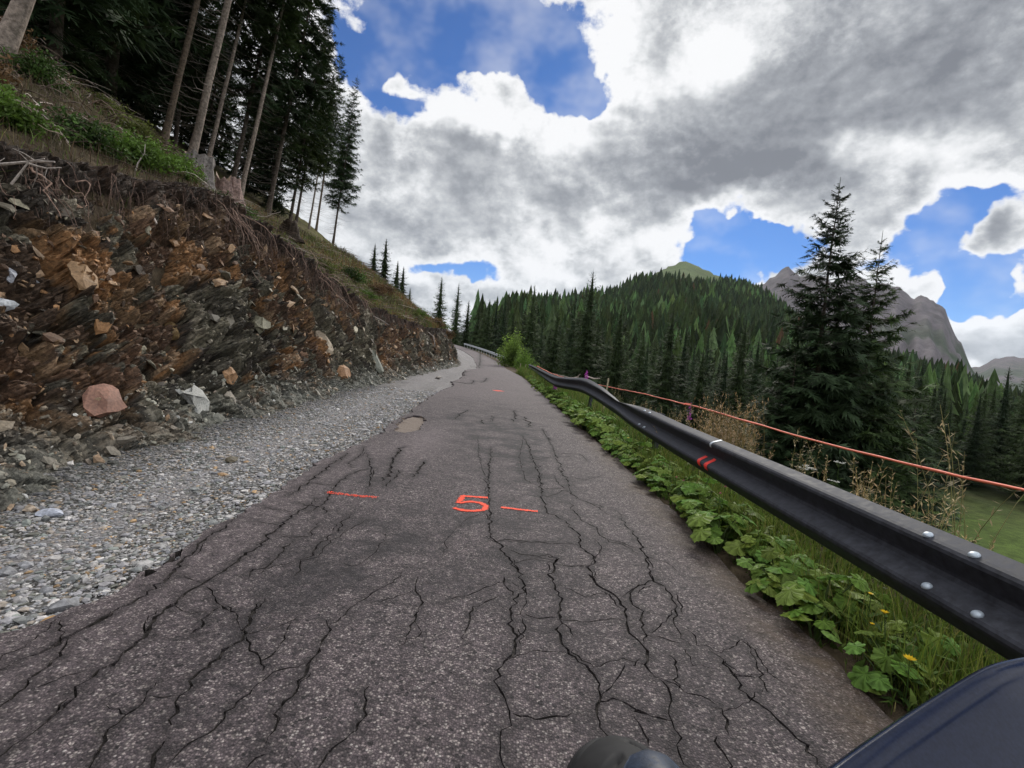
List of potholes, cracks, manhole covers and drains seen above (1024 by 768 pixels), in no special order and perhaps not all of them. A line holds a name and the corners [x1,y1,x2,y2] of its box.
pothole [395,416,425,433]
crack [0,448,425,768]
crack [443,410,818,768]
